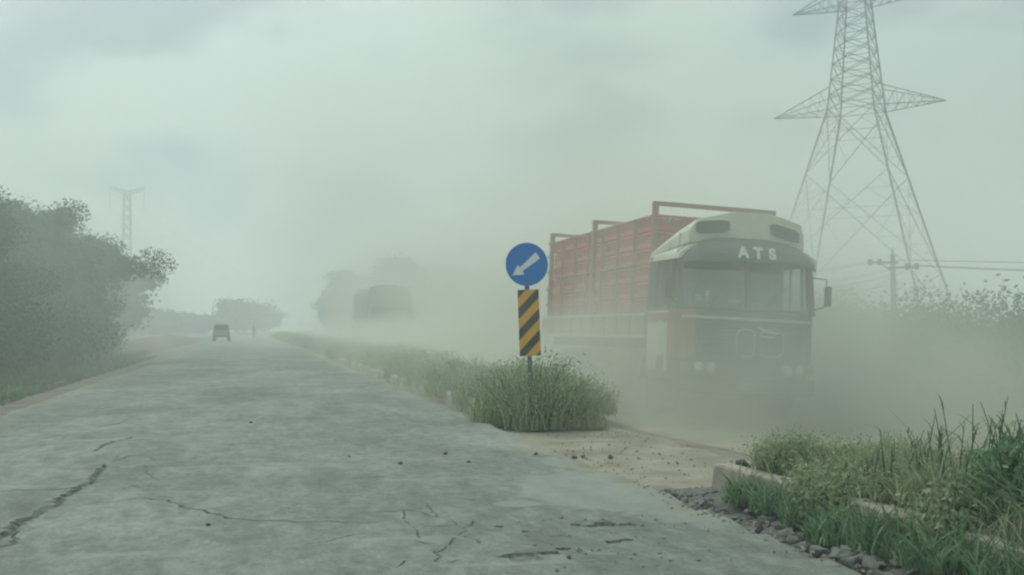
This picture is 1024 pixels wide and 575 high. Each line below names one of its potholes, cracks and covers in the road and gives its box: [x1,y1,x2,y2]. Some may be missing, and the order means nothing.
crack [0,422,482,568]
